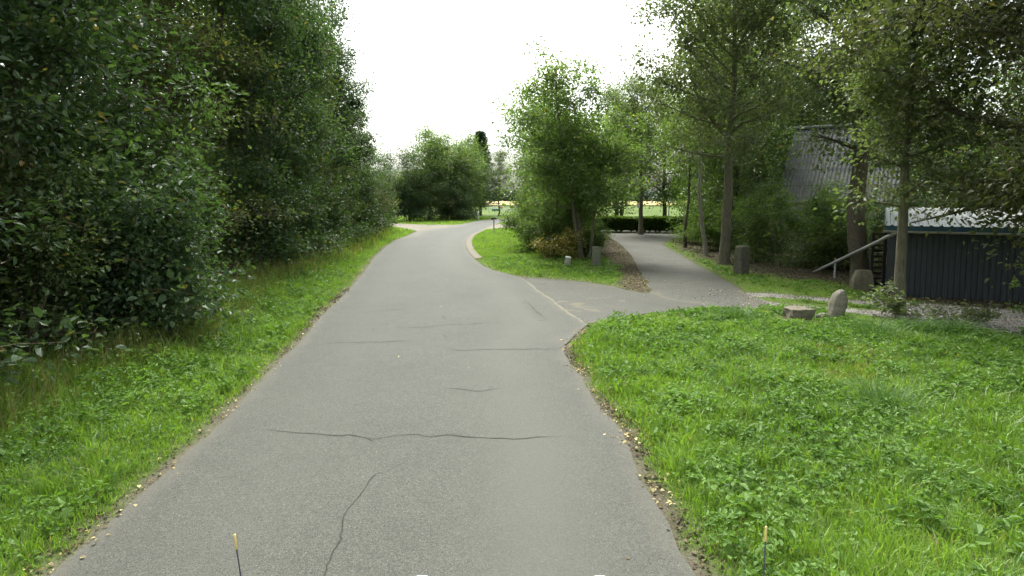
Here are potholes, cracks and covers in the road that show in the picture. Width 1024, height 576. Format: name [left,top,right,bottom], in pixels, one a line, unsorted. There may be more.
crack [324,461,407,576]
crack [317,317,528,351]
crack [267,429,587,442]
